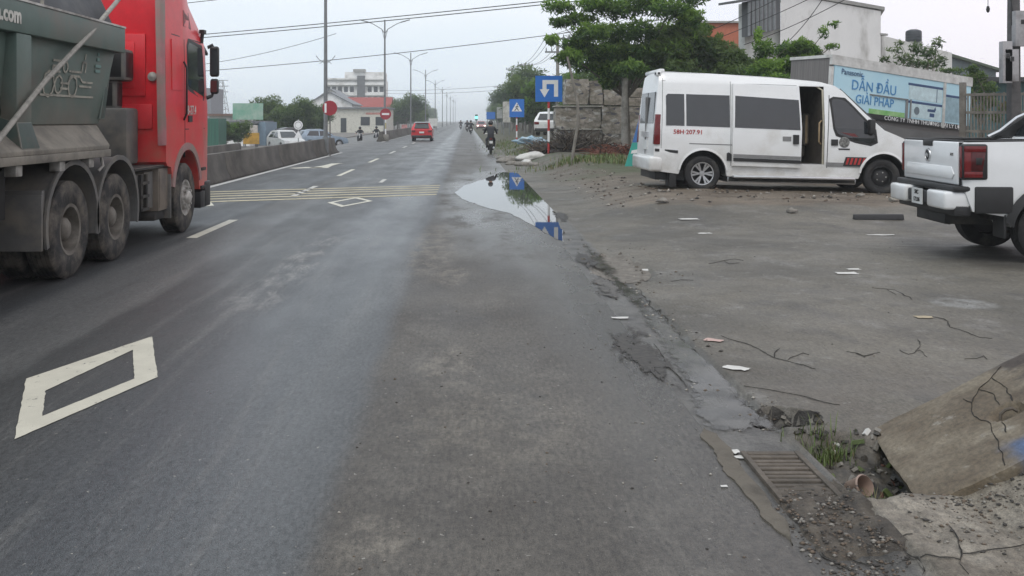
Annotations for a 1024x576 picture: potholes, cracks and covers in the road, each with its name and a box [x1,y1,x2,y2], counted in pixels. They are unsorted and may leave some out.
crack [820,526,1024,574]
pothole [750,403,824,431]
crack [936,317,1013,465]
drain grate [740,451,842,503]
crack [721,335,815,369]
